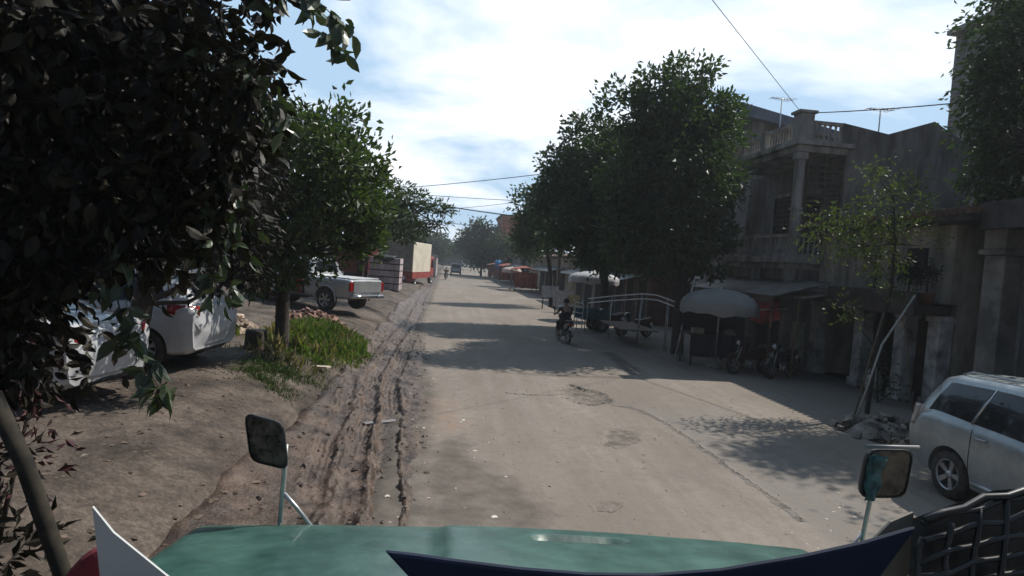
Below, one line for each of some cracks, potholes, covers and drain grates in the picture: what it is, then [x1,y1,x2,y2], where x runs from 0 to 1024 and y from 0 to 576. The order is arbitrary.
crack [612,405,805,522]
